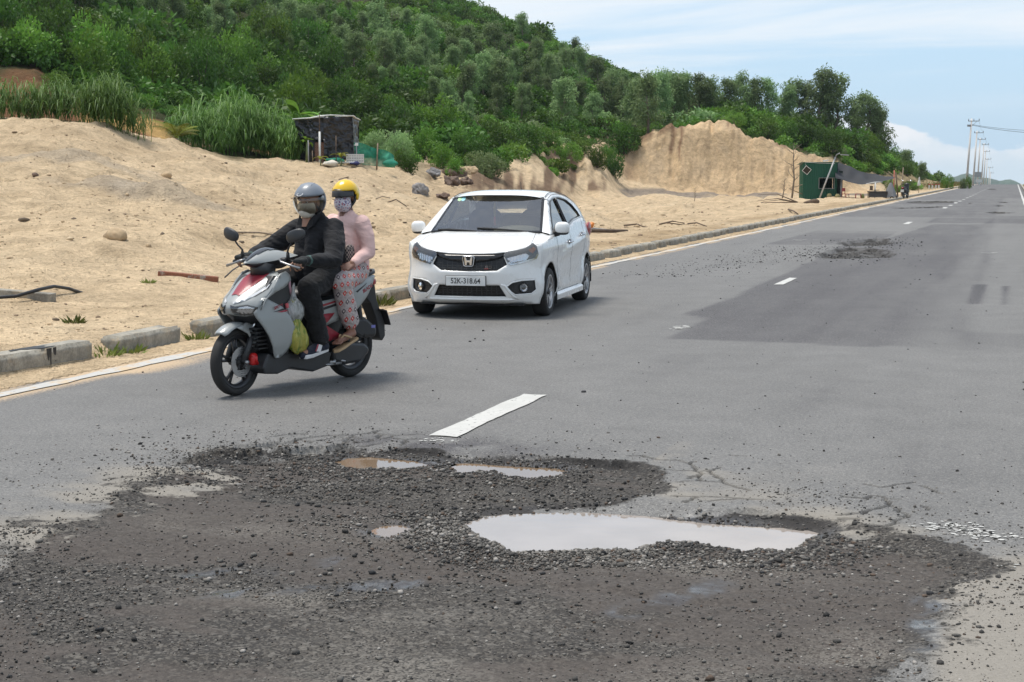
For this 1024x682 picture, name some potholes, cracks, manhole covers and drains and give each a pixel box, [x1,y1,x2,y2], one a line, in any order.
crack [626,454,767,503]
pothole [836,238,892,246]
crack [835,481,946,527]
pothole [813,248,898,259]
pothole [0,441,979,682]
